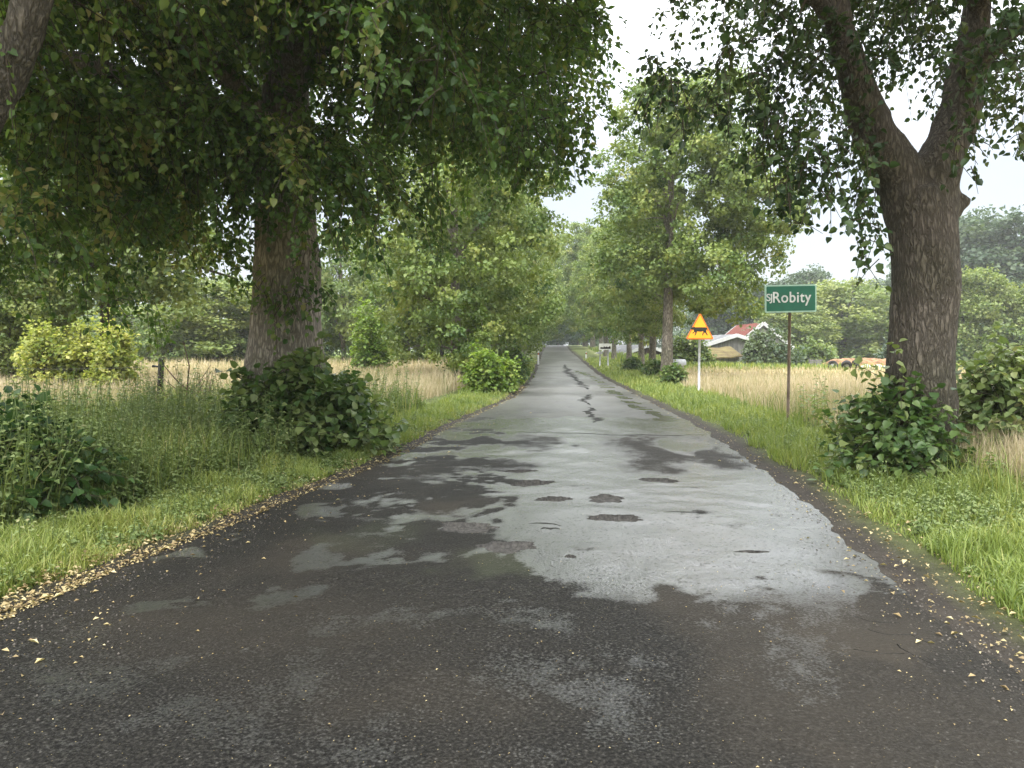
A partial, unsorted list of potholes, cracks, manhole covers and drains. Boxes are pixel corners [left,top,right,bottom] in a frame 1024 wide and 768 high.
pothole [475,541,537,554]
pothole [510,479,555,487]
pothole [587,514,643,522]
crack [519,365,681,436]
pothole [588,494,624,503]
pothole [438,522,500,533]
